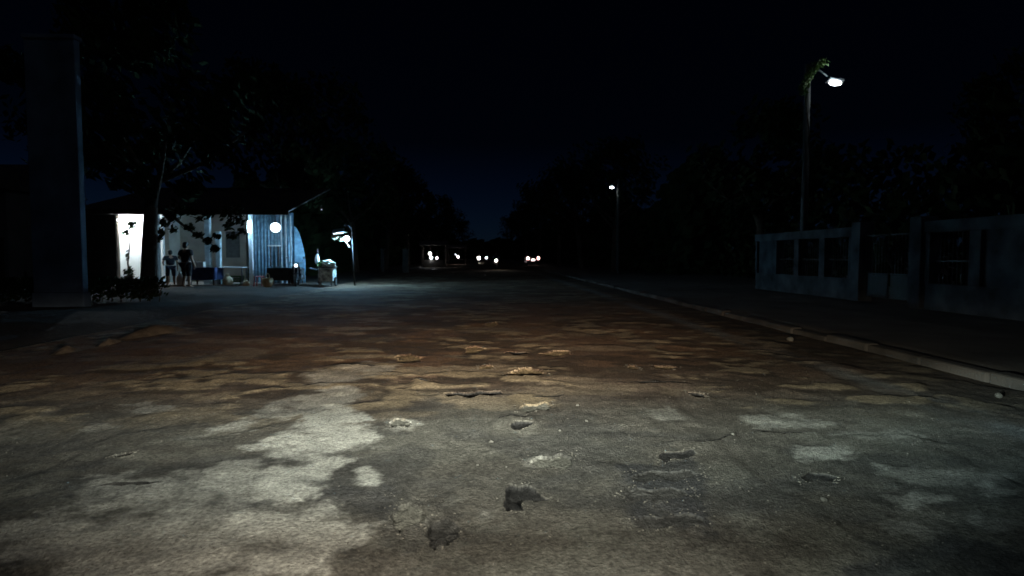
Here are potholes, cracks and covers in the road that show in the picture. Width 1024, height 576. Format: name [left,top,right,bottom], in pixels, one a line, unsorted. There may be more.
pothole [801,472,837,483]
pothole [442,390,504,398]
crack [659,434,731,444]
pothole [657,448,698,462]
pothole [508,420,534,430]
pothole [423,517,463,550]
pothole [389,418,412,428]
pothole [503,483,550,512]
pothole [530,452,573,471]
pothole [519,401,552,413]
